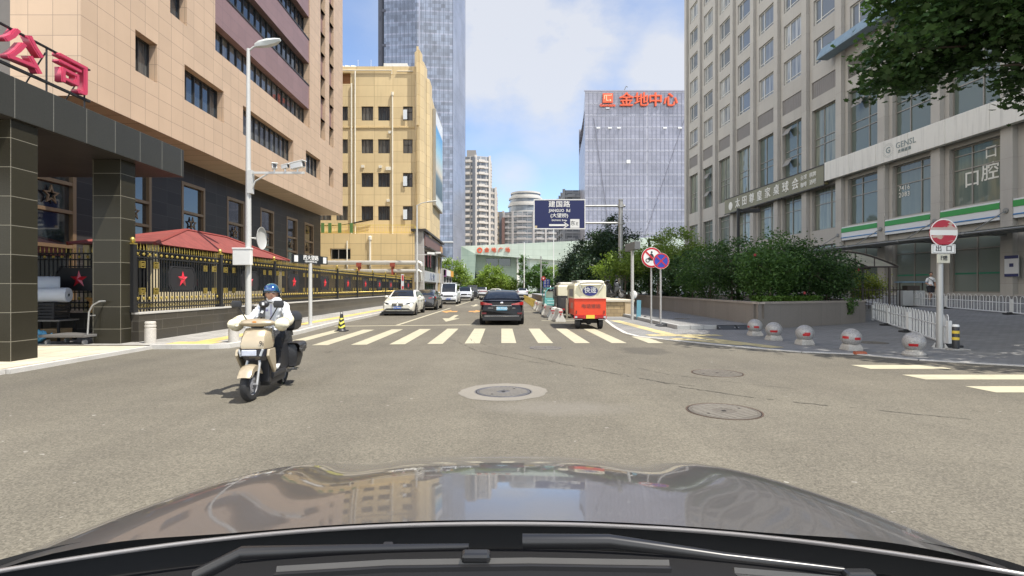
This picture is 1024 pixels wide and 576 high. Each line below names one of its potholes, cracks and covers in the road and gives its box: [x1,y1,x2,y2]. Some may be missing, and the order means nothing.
manhole cover [691,369,744,377]
manhole cover [458,383,547,401]
manhole cover [686,403,764,420]
